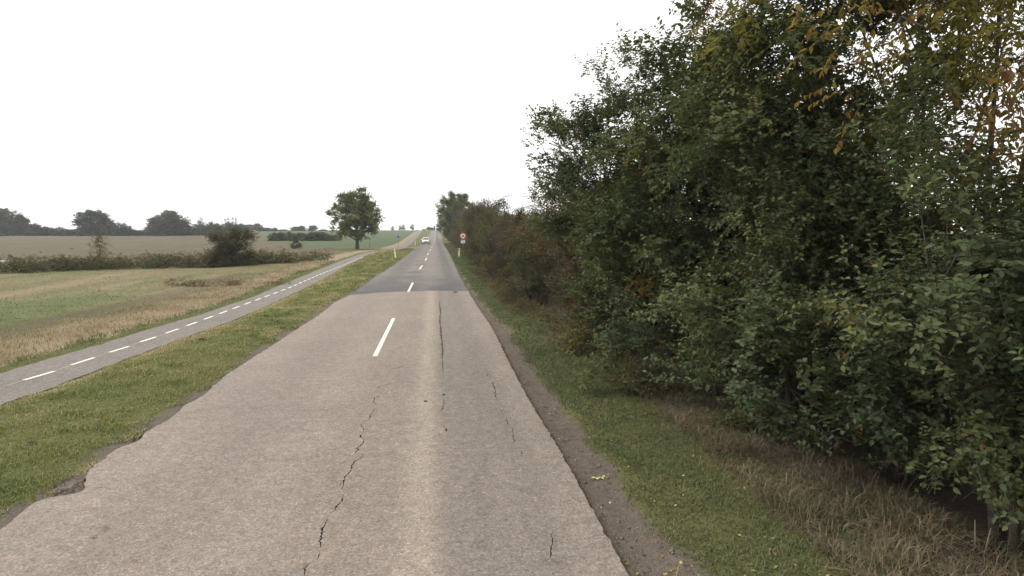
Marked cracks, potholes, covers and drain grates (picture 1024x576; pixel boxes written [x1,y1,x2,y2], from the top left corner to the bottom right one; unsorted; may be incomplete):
crack [304,365,405,575]
